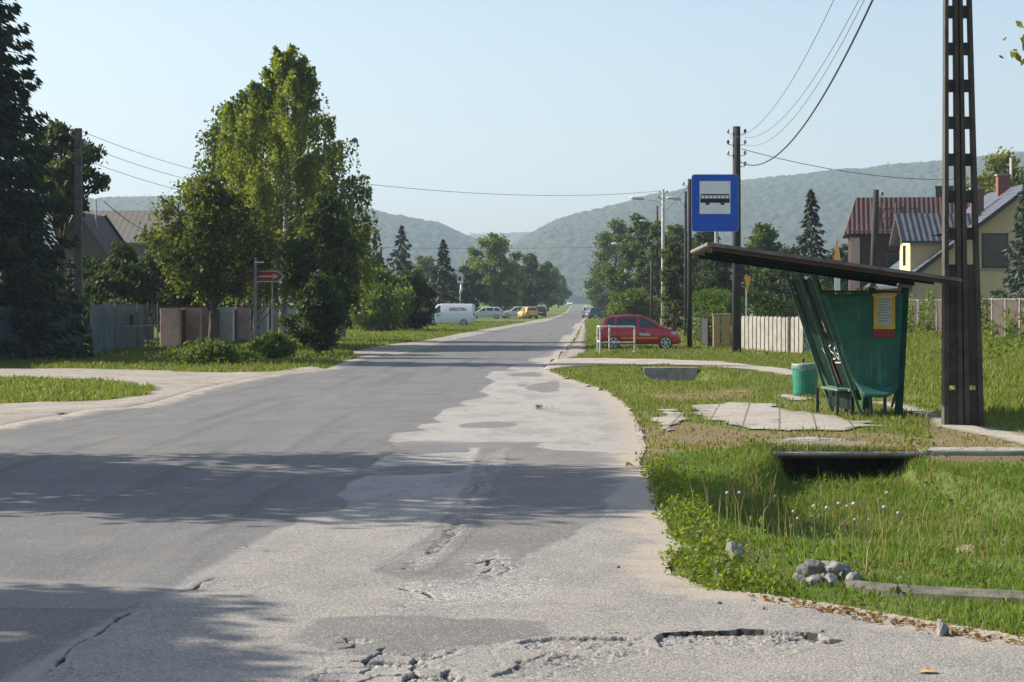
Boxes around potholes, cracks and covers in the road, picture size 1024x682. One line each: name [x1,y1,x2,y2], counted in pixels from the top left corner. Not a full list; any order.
pothole [642,628,852,659]
crack [377,453,524,612]
crack [180,577,267,593]
crack [289,634,486,682]
